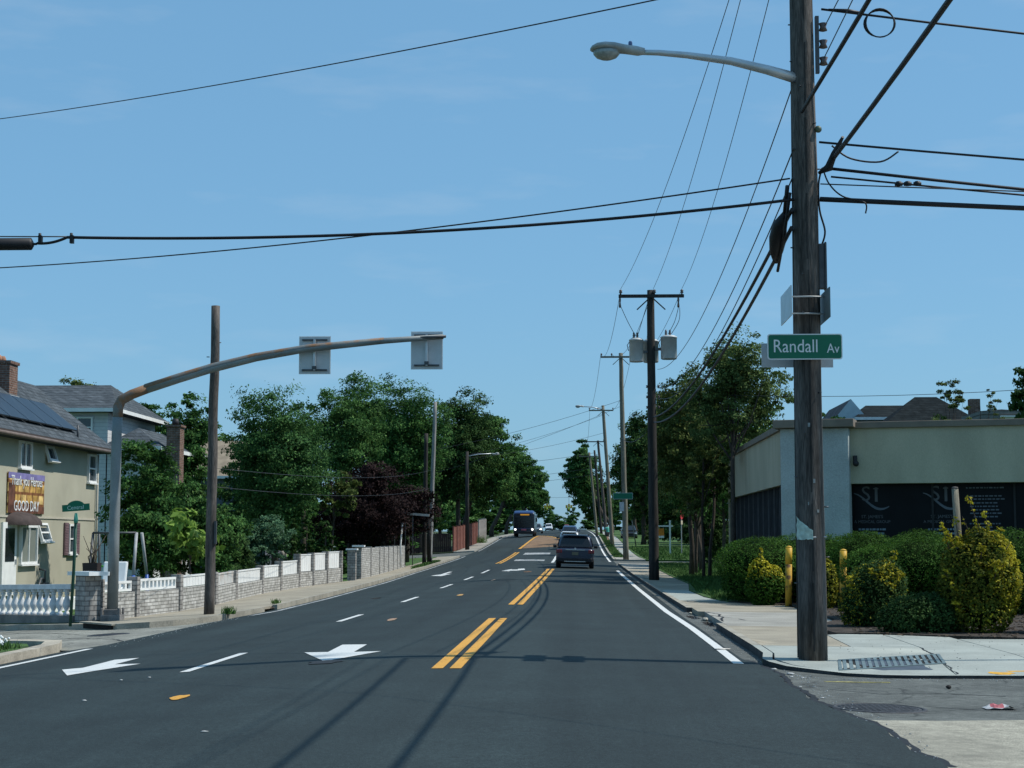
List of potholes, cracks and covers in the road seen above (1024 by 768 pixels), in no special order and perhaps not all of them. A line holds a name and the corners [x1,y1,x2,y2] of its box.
manhole cover [833,703,928,714]
drain grate [838,654,946,671]
